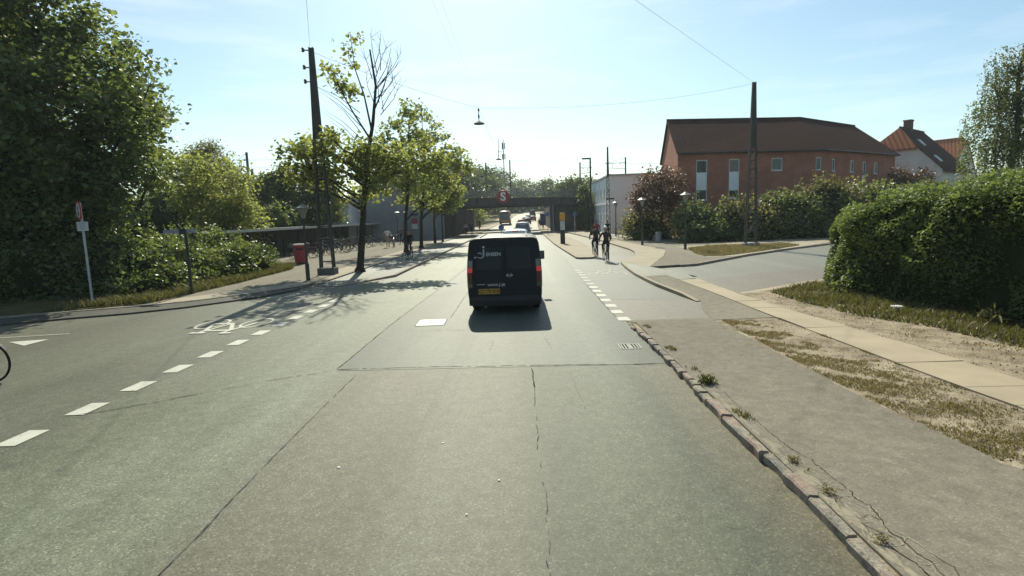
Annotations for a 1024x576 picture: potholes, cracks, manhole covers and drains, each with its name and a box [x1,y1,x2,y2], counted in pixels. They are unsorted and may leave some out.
crack [724,391,960,576]
crack [531,368,551,576]
